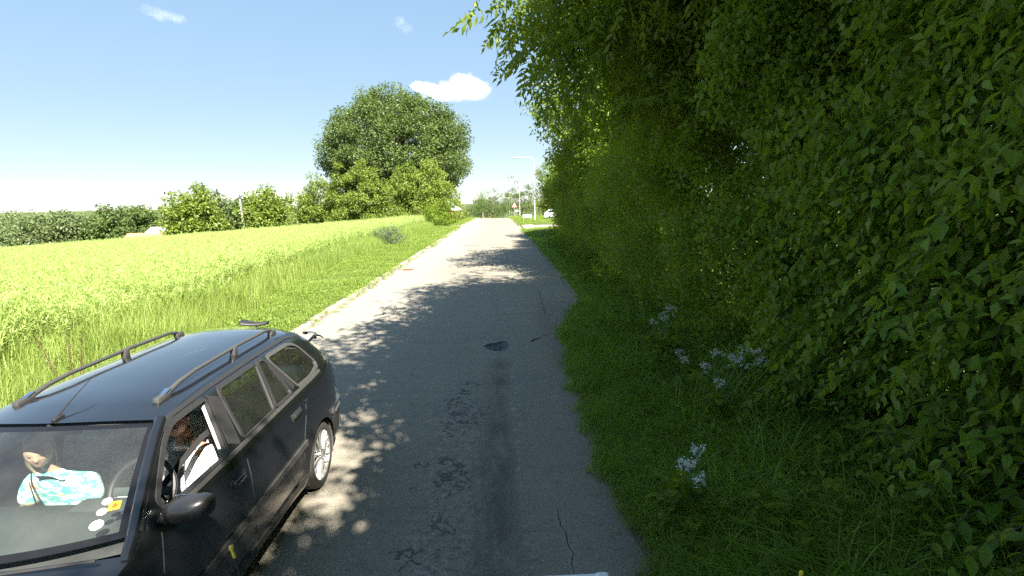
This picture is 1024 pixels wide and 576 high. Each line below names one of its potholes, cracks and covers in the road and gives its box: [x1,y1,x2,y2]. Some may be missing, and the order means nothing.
crack [557,510,575,575]
pothole [484,341,509,351]
